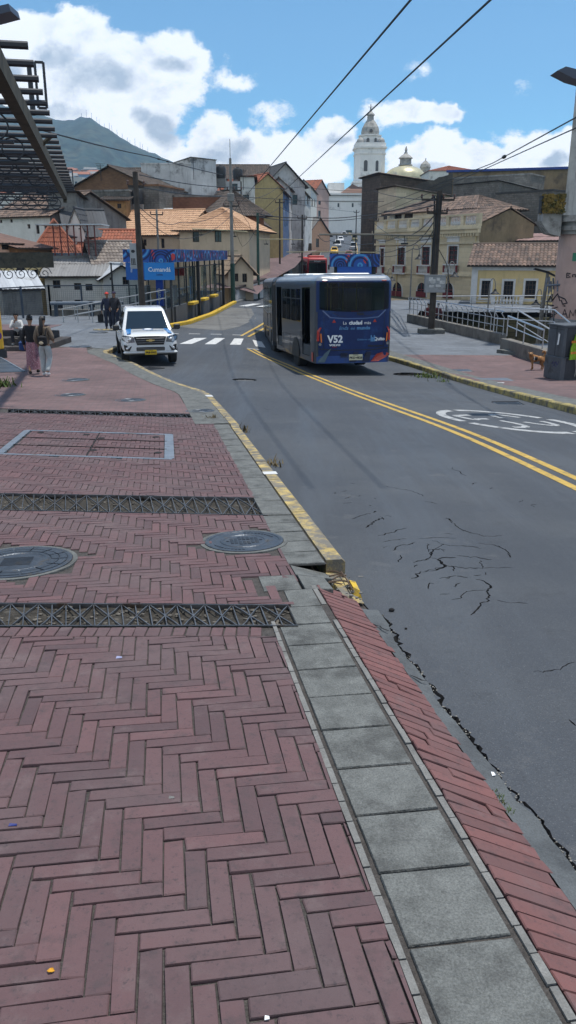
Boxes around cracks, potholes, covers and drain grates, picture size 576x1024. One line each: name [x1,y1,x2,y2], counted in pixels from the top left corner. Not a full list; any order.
manhole cover [201,530,288,555]
utility cover [0,430,174,460]
crack [373,616,576,871]
manhole cover [0,546,78,581]
crack [334,483,521,615]
